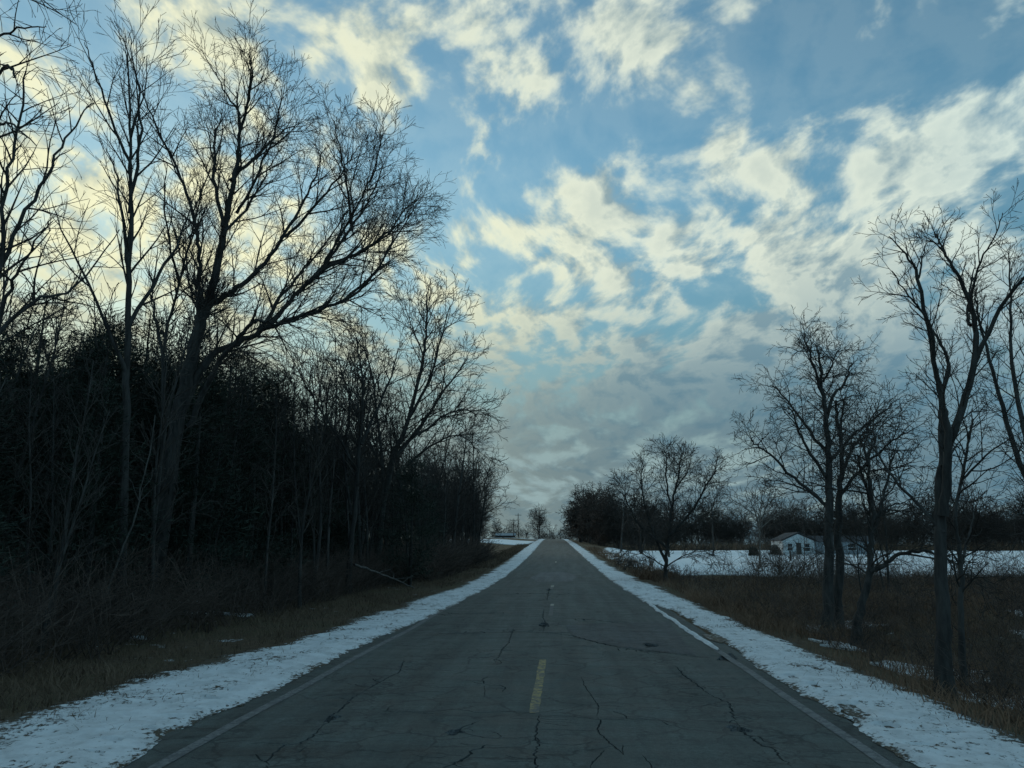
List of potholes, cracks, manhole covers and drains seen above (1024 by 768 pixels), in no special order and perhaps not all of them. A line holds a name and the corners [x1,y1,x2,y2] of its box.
crack [253,589,681,768]
crack [668,666,791,766]
